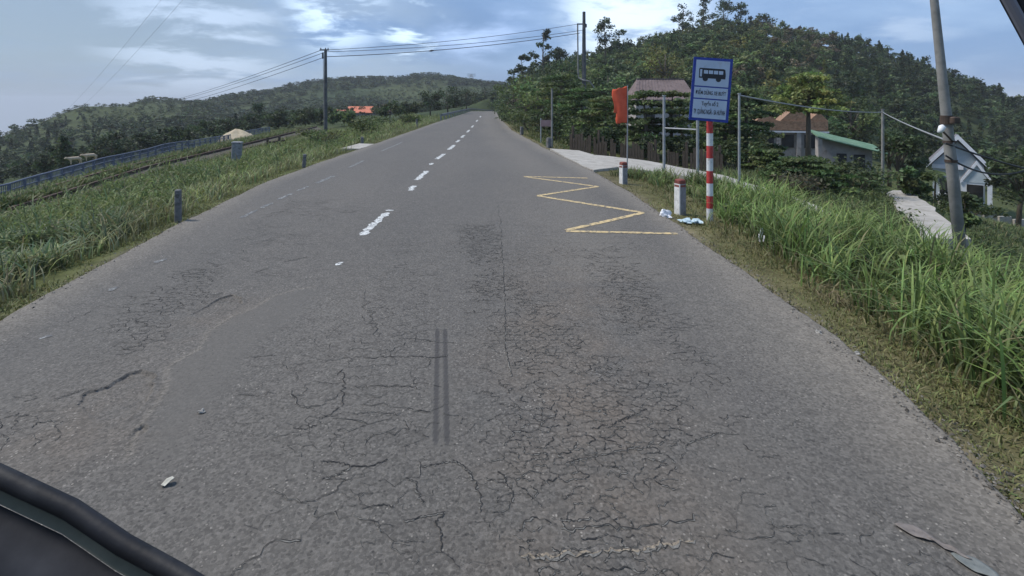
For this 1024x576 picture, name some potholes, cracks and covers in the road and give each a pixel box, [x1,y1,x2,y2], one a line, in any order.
crack [68,198,367,355]
crack [230,220,960,576]
crack [0,388,87,450]
